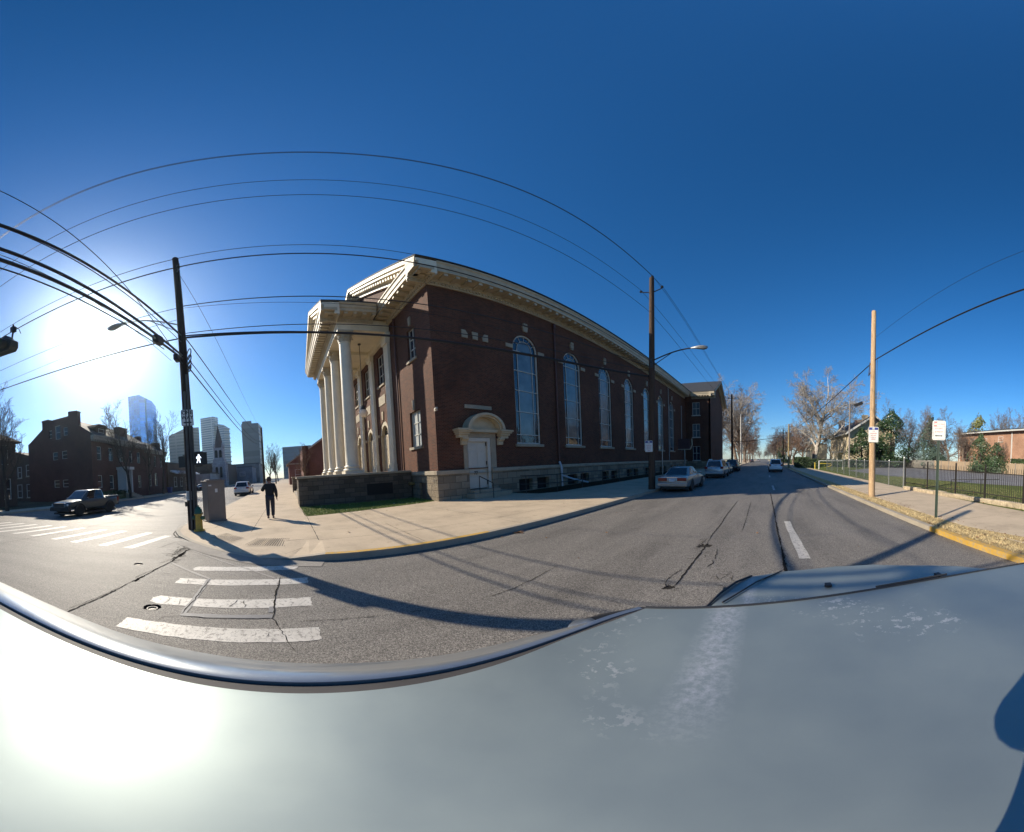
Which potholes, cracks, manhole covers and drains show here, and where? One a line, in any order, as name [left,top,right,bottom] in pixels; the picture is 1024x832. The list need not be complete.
crack [661,502,751,589]
